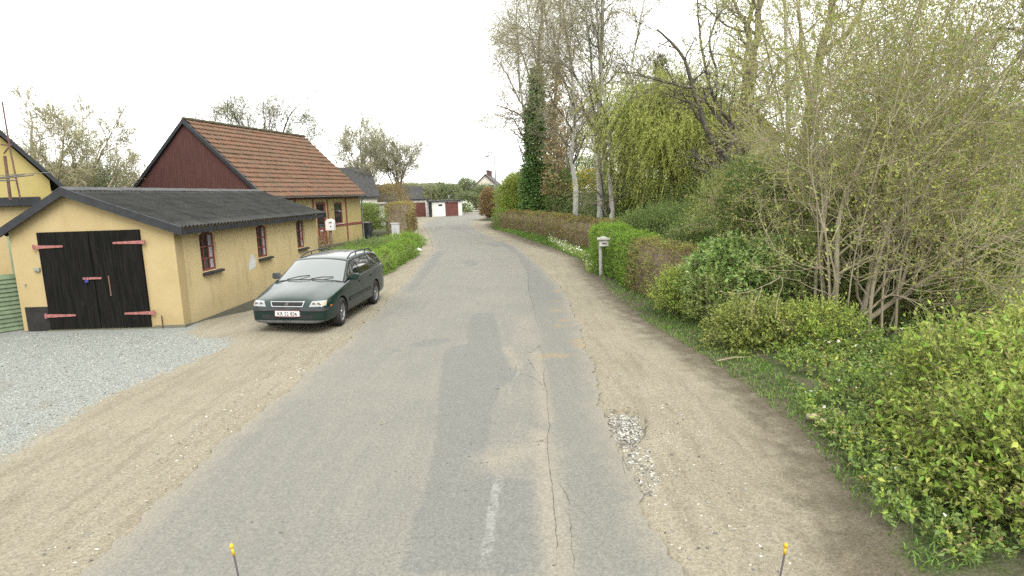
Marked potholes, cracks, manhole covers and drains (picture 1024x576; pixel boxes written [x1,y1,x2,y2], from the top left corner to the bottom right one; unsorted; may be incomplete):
crack [525,329,558,546]
pothole [604,408,647,448]
